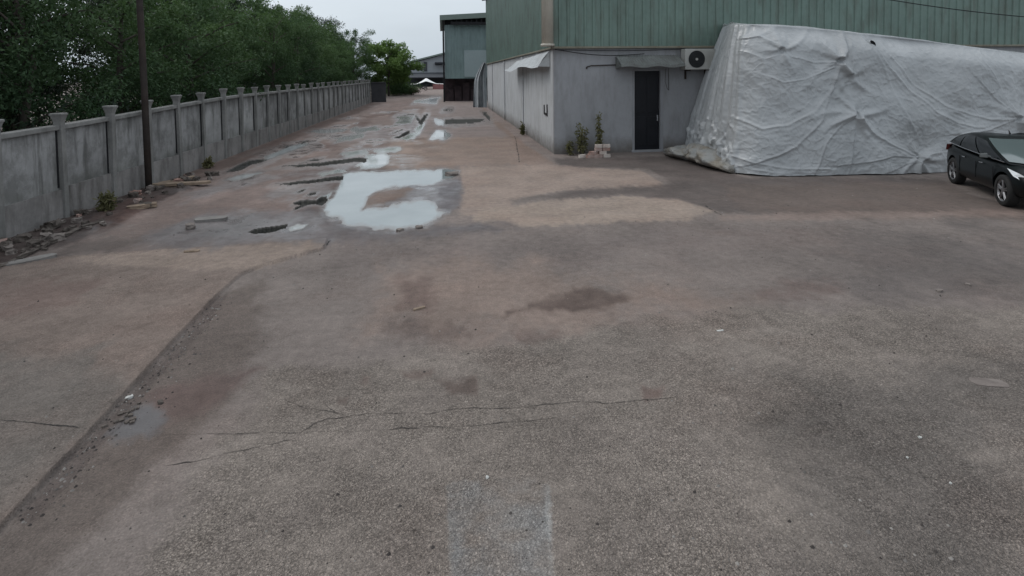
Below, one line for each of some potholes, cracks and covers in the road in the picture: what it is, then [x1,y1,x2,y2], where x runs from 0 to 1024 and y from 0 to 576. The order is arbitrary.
pothole [288,157,367,167]
pothole [248,224,288,234]
pothole [275,176,343,185]
pothole [293,196,328,210]
crack [167,397,671,466]
pothole [225,159,267,173]
